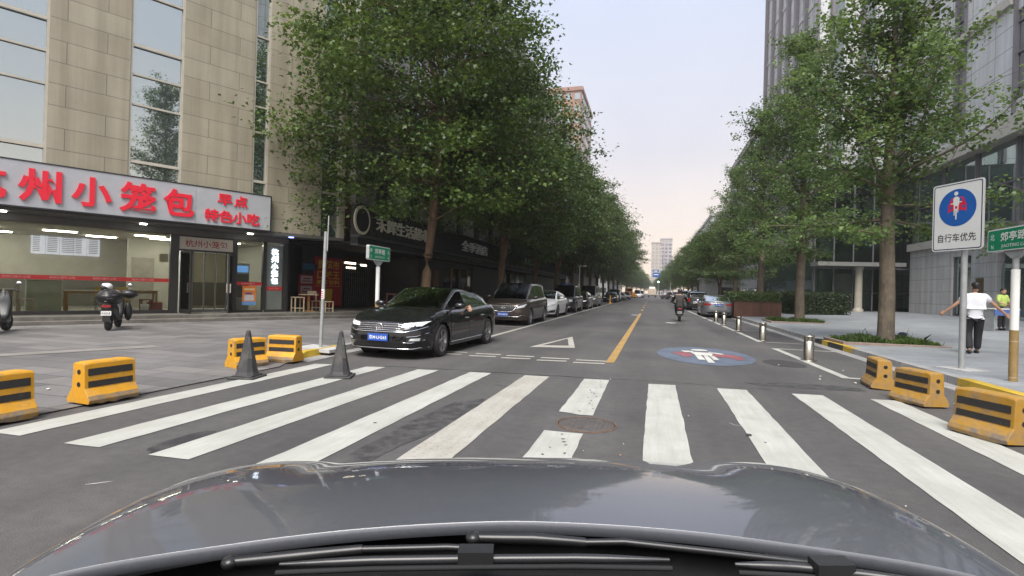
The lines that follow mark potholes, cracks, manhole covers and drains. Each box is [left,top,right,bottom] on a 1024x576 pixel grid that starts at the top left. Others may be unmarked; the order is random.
manhole cover [556,416,617,433]
